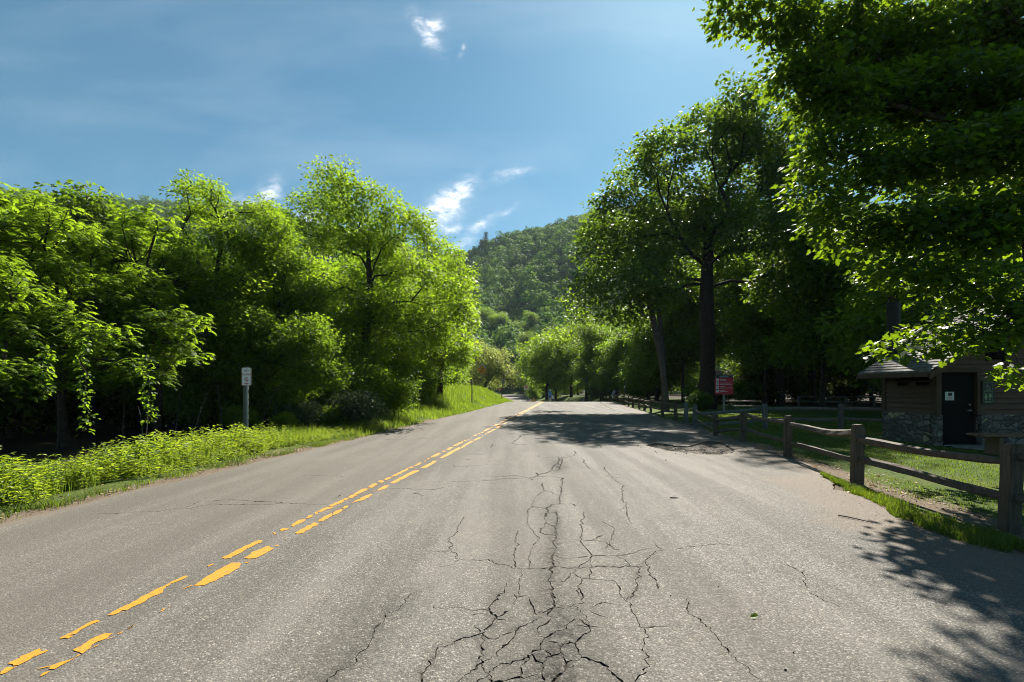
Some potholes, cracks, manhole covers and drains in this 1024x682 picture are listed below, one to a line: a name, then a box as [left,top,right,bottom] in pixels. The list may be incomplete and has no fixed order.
pothole [646,441,737,455]
crack [326,594,411,682]
crack [396,436,631,523]
crack [107,500,328,514]
crack [420,478,672,682]
